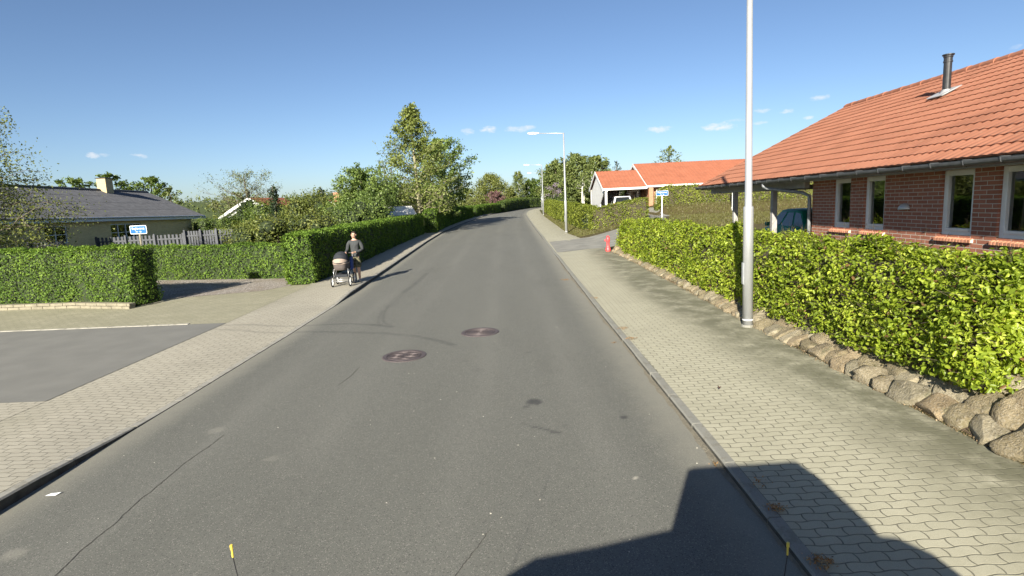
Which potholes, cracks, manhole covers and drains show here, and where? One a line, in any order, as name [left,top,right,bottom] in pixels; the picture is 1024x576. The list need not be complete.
manhole cover [461,327,499,337]
crack [55,435,224,576]
manhole cover [382,350,427,362]
